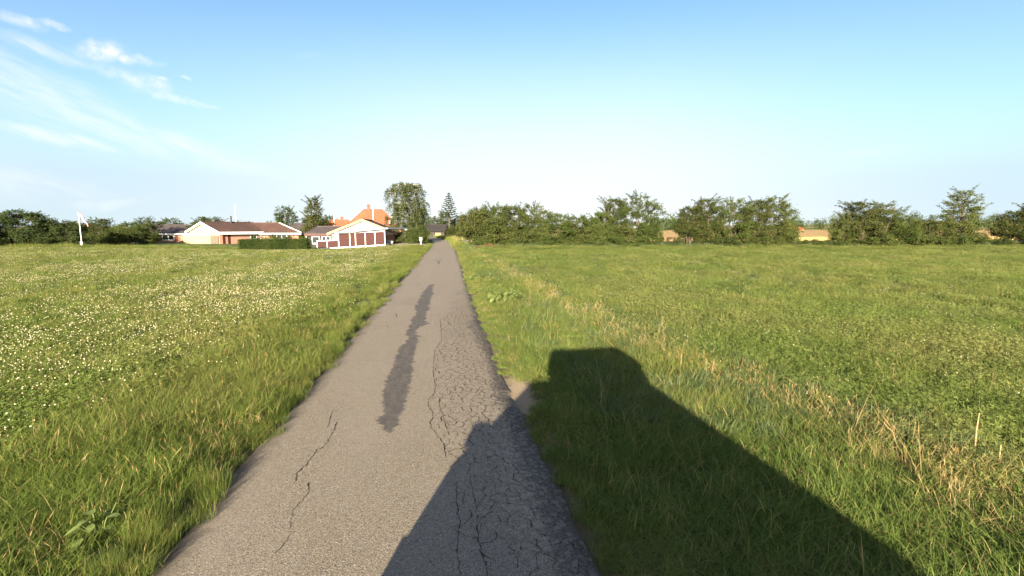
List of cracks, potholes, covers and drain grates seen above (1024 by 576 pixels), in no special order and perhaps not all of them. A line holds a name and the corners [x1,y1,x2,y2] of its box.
crack [274,409,337,554]
crack [428,290,590,576]
